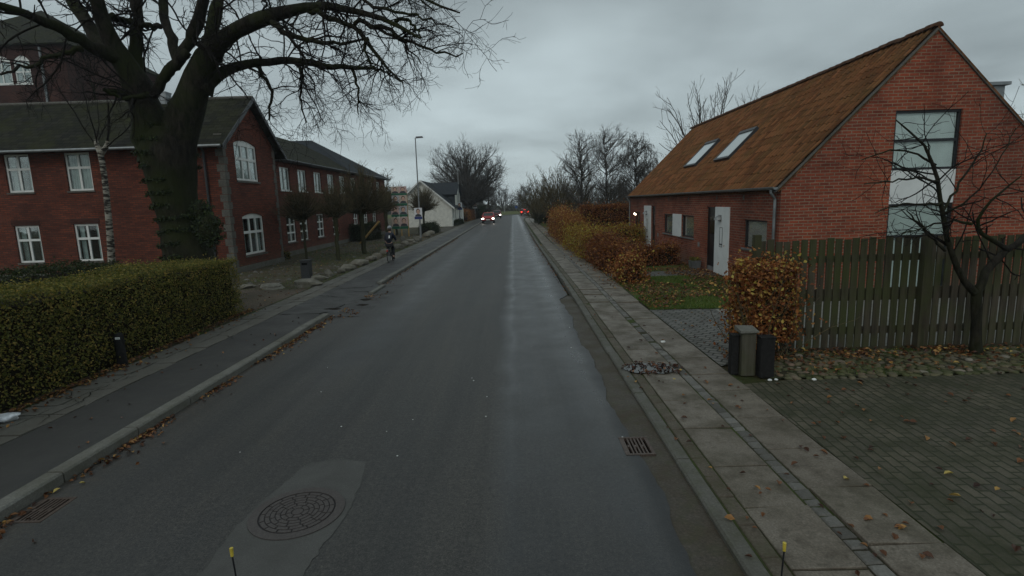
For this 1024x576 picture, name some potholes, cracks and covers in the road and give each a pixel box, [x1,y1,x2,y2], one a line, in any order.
manhole cover [247,487,345,541]
drain grate [9,497,77,523]
crack [17,372,134,426]
drain grate [618,436,656,456]
